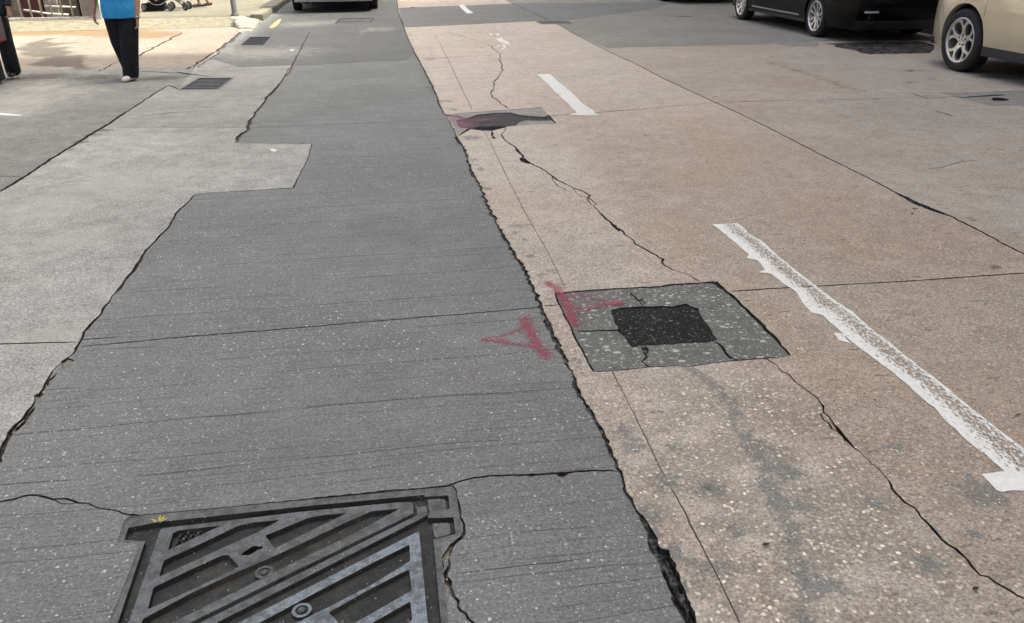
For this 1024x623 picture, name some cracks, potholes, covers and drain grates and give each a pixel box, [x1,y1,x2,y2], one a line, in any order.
drain grate [239,37,273,45]
crack [0,469,618,519]
pothole [457,112,552,131]
drain grate [178,78,234,90]
crack [716,342,1024,599]
crack [396,0,697,623]
crack [0,195,195,463]
